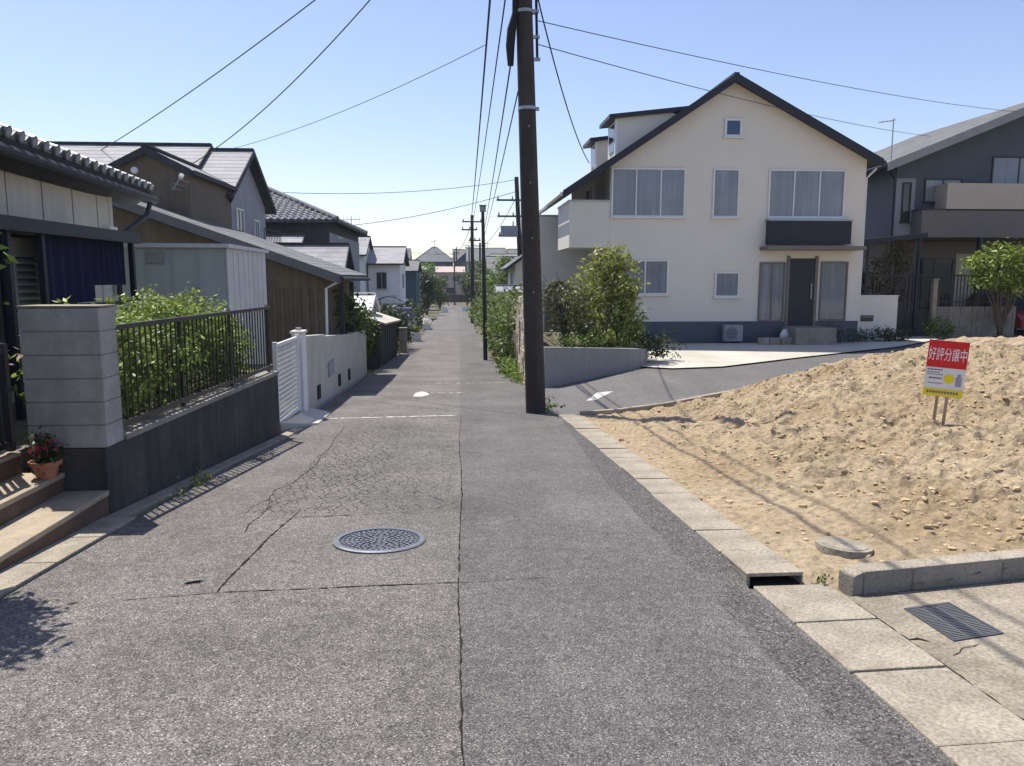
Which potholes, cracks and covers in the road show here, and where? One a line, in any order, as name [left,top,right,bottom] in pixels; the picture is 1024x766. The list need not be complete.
manhole cover [333,527,426,554]
crack [244,419,457,533]
